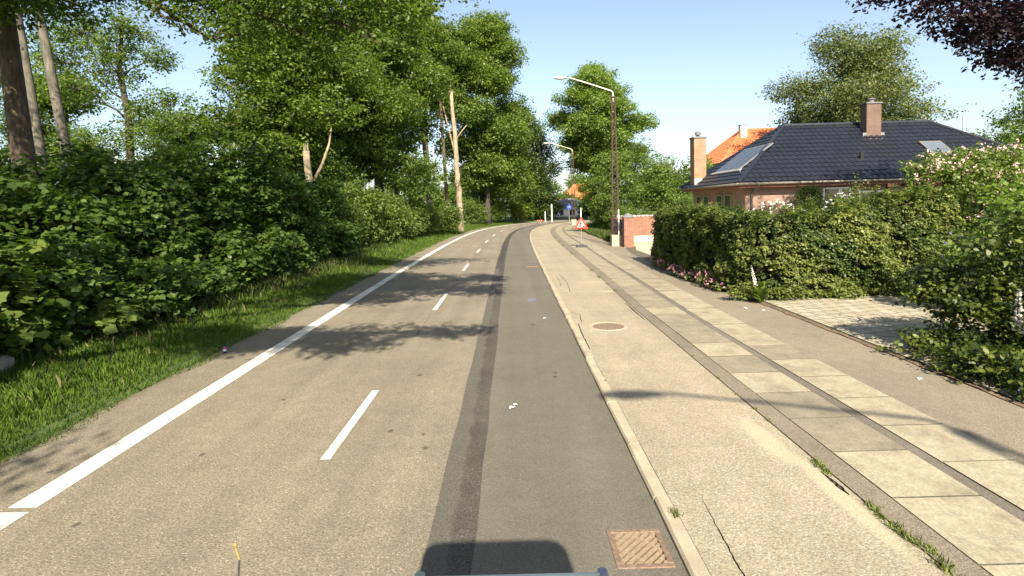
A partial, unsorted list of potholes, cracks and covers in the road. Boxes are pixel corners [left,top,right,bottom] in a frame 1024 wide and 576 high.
crack [822,472,850,496]
drain grate [606,528,676,569]
crack [702,499,745,576]
manhole cover [589,322,628,331]
